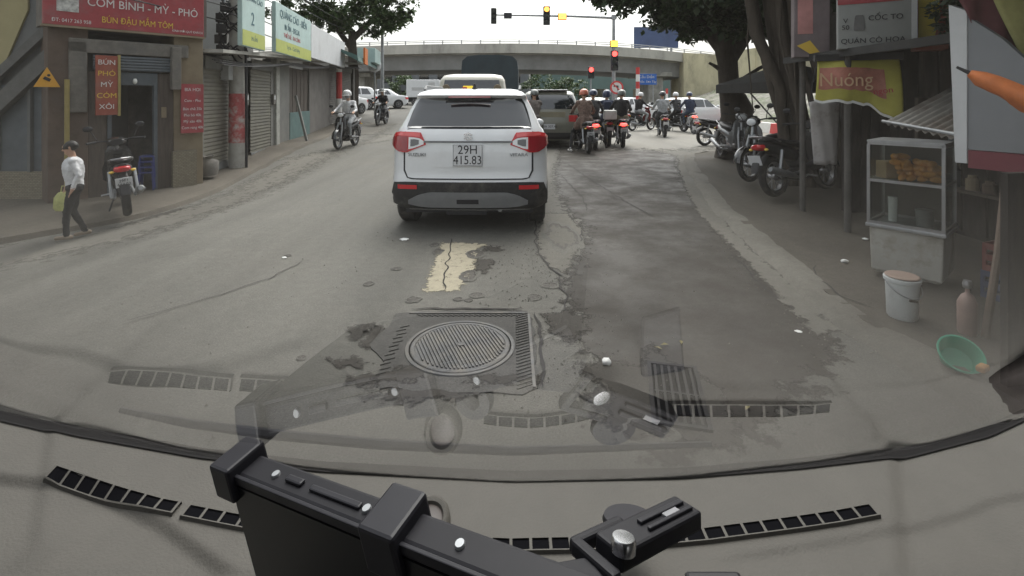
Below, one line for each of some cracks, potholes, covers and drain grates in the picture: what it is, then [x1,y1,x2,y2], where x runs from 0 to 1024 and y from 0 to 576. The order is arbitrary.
crack [418,165,652,387]
drain grate [647,360,700,387]
crack [123,263,299,322]
manhole cover [370,310,539,396]
